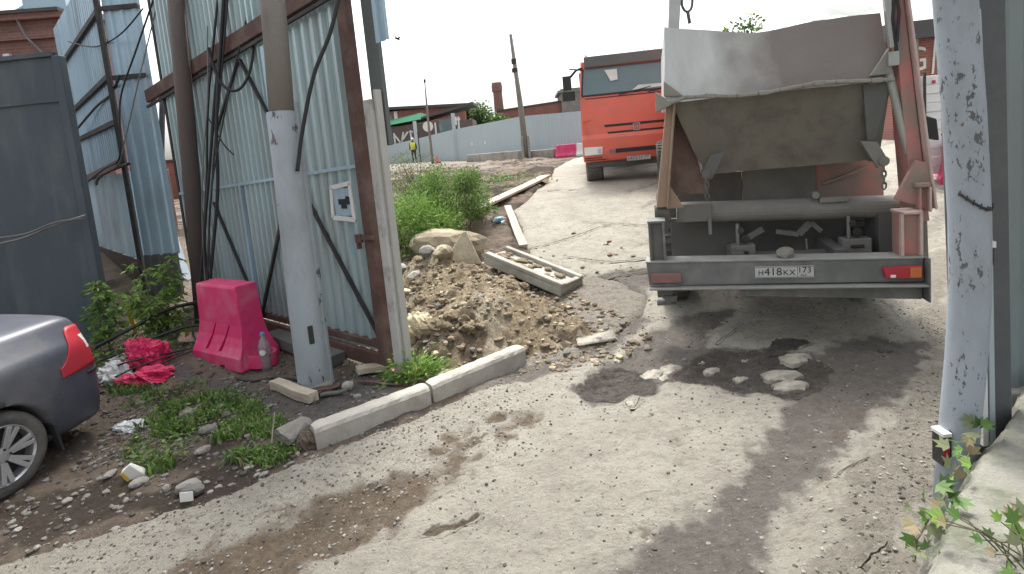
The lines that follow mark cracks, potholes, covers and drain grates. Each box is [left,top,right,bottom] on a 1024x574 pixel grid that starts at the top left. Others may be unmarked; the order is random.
crack [528,220,650,281]
pothole [575,367,659,403]
crack [856,540,893,572]
pothole [670,349,834,401]
pothole [763,337,816,356]
